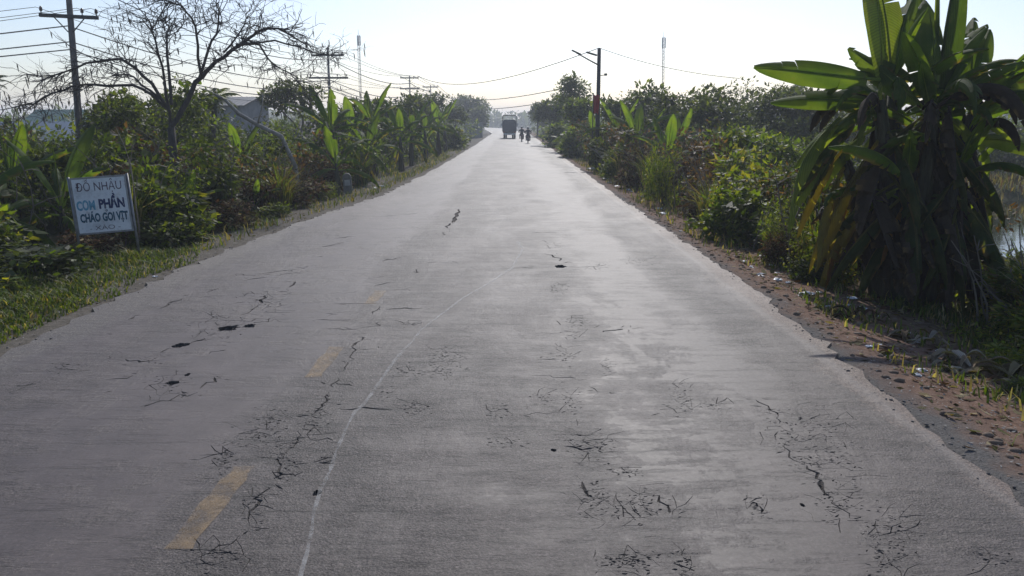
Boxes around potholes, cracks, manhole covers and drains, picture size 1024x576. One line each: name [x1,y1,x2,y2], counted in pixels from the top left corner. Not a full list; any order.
crack [171,236,465,574]
crack [485,297,692,530]
crack [750,398,1016,576]
crack [104,237,346,407]
